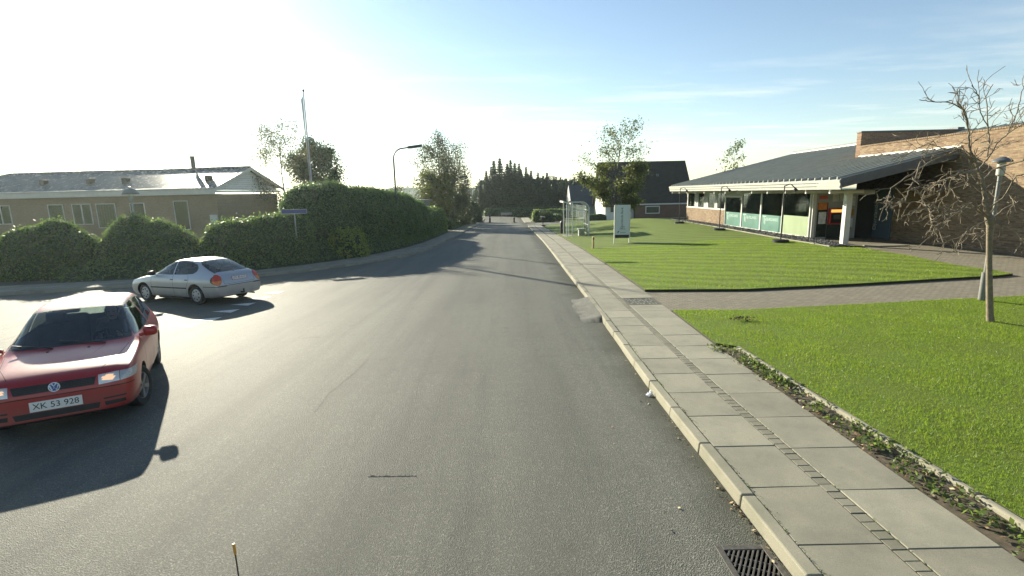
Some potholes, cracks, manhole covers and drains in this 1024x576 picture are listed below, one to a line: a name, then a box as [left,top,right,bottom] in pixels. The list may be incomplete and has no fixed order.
drain grate [715,545,789,576]
